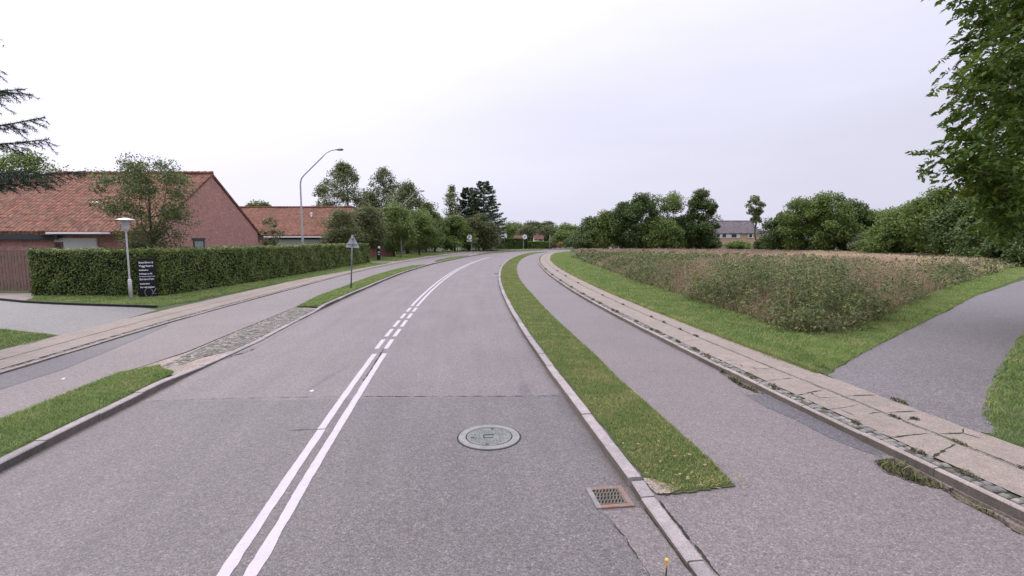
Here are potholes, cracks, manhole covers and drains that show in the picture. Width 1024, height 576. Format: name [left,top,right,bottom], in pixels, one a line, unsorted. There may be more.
pothole [875,458,952,491]
drain grate [586,485,635,510]
crack [761,368,981,457]
manhole cover [457,425,521,450]
